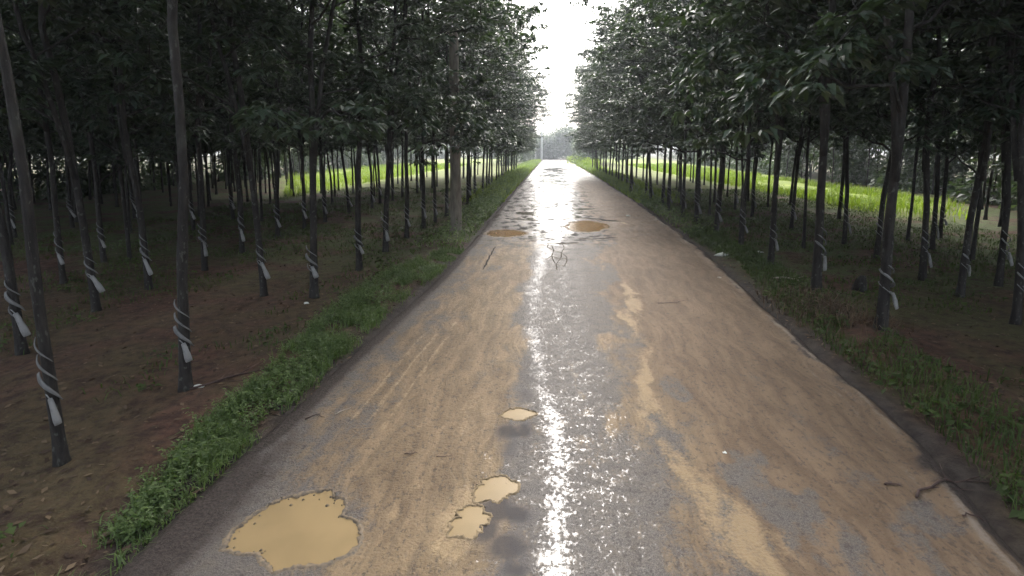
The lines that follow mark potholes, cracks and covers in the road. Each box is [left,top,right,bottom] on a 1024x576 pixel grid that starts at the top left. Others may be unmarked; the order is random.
pothole [498,407,538,421]
crack [483,247,496,270]
pothole [471,474,521,504]
pothole [563,220,613,233]
pothole [218,487,364,575]
pothole [446,503,494,540]
pothole [483,229,529,237]
